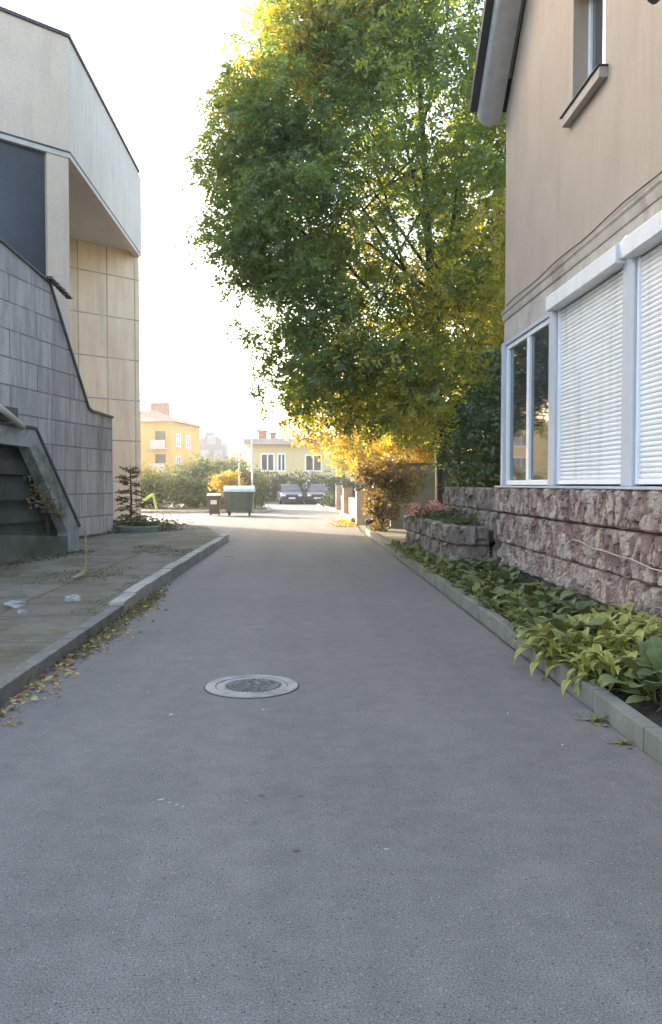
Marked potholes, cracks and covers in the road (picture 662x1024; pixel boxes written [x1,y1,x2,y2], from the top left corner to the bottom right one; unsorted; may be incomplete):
manhole cover [204,674,299,699]
